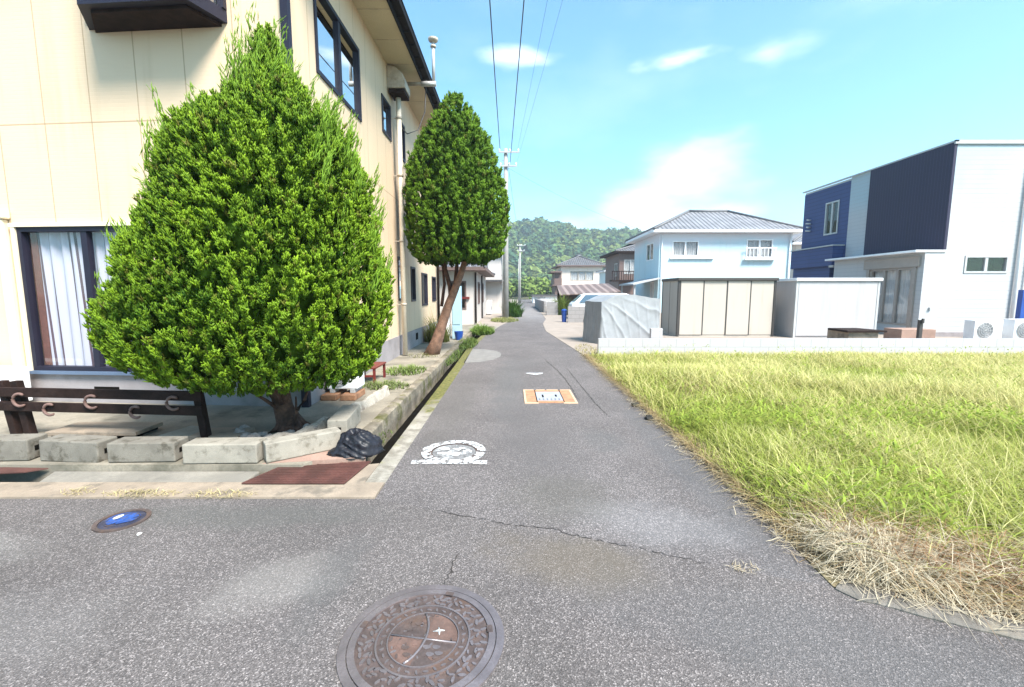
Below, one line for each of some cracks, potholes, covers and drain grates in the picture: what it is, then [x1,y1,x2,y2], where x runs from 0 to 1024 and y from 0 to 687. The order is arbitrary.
manhole cover [336,585,504,687]
crack [410,505,726,567]
manhole cover [523,389,578,404]
manhole cover [91,508,152,533]
